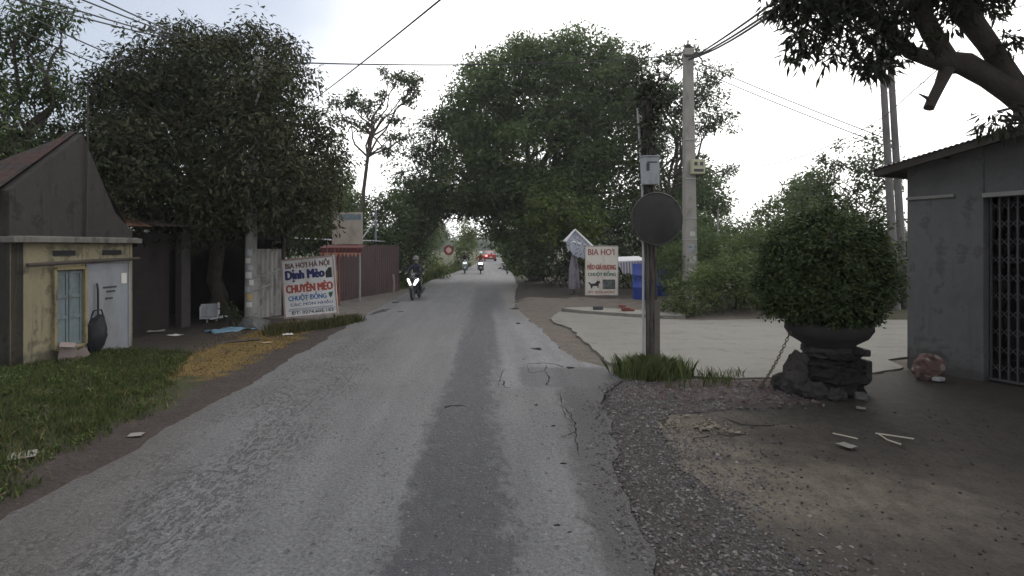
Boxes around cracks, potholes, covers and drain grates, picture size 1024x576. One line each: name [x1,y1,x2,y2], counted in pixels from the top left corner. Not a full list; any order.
crack [523,359,578,451]
